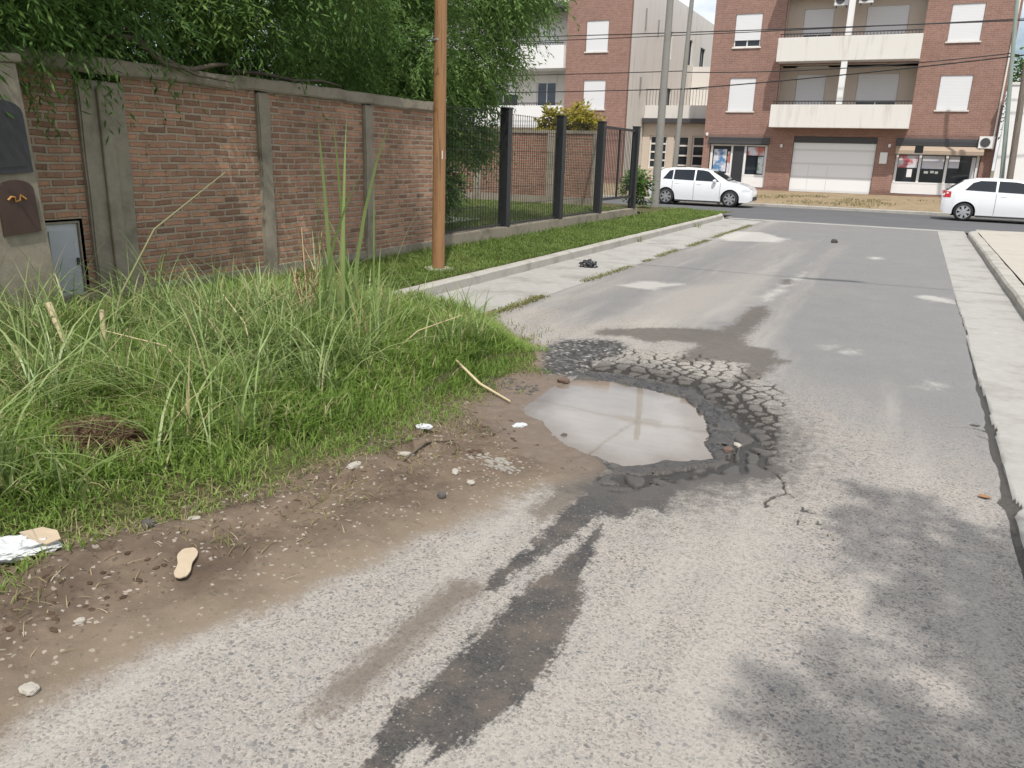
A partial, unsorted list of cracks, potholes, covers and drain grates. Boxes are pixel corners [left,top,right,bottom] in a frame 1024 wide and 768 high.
pothole [511,370,741,476]
crack [582,348,824,525]
